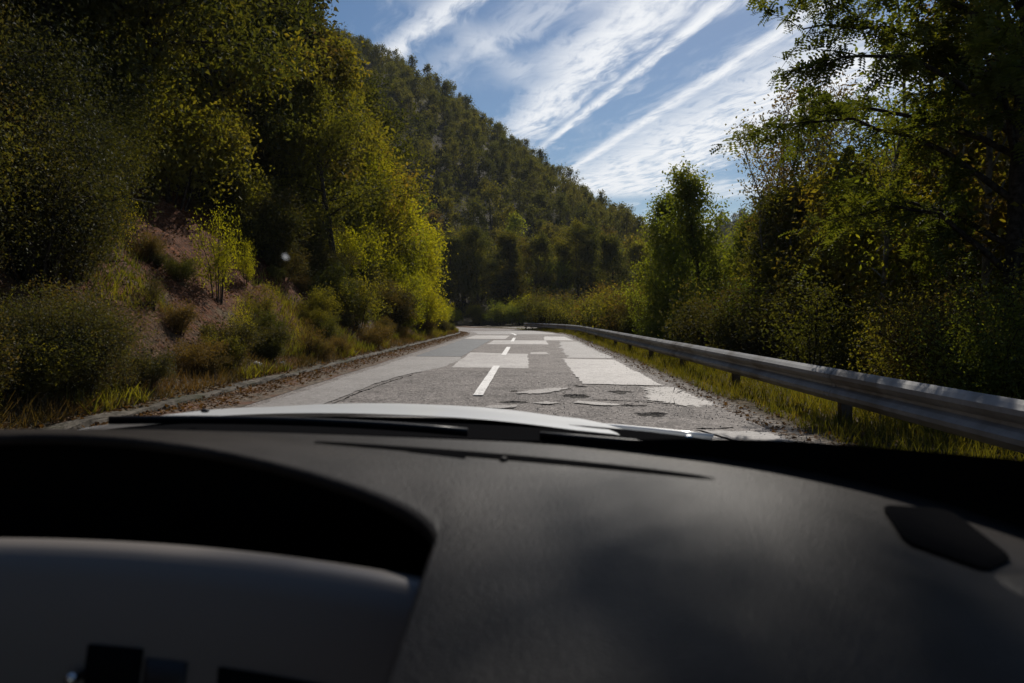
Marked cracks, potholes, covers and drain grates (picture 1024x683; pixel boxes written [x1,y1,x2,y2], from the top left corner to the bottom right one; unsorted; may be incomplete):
crack [332,375,411,404]
